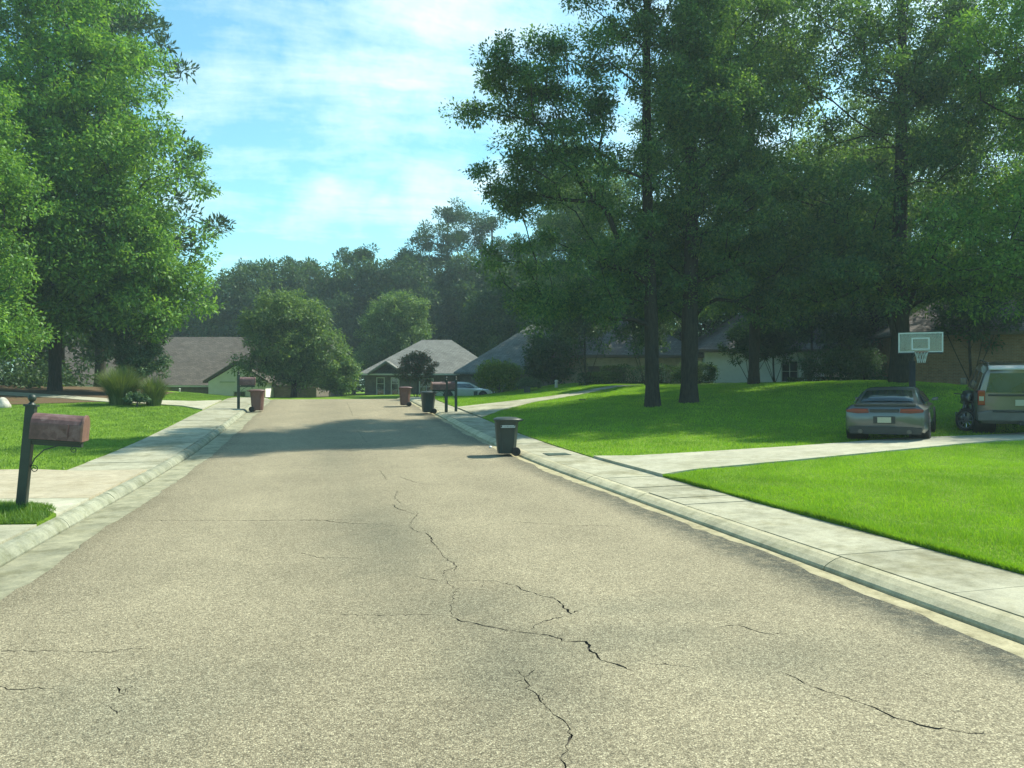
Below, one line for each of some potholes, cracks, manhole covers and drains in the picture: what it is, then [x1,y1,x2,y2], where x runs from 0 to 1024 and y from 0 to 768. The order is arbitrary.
crack [514,669,573,768]
crack [785,673,988,735]
crack [394,491,632,671]
